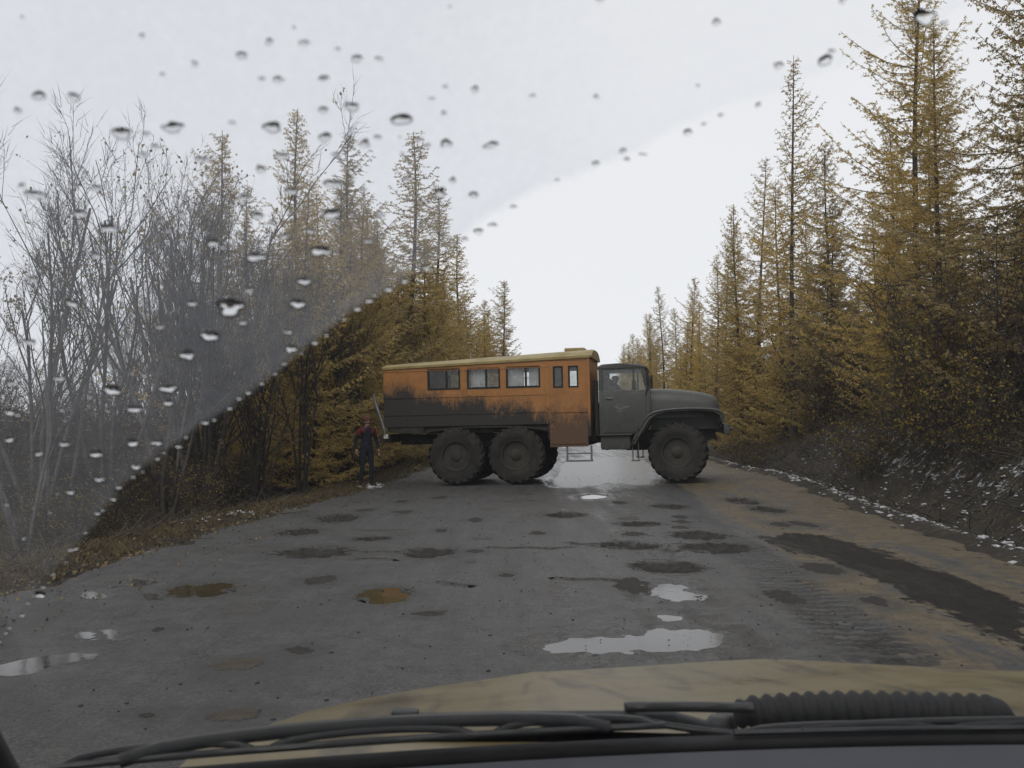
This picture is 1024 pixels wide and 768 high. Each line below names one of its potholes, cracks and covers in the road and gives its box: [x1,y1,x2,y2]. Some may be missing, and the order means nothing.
pothole [400,547,464,560]
pothole [302,575,338,586]
pothole [157,580,242,600]
pothole [350,585,415,607]
pothole [663,542,770,556]
pothole [262,545,364,560]
pothole [544,511,589,519]
pothole [611,577,651,596]
pothole [309,513,366,524]
pothole [626,559,716,576]
